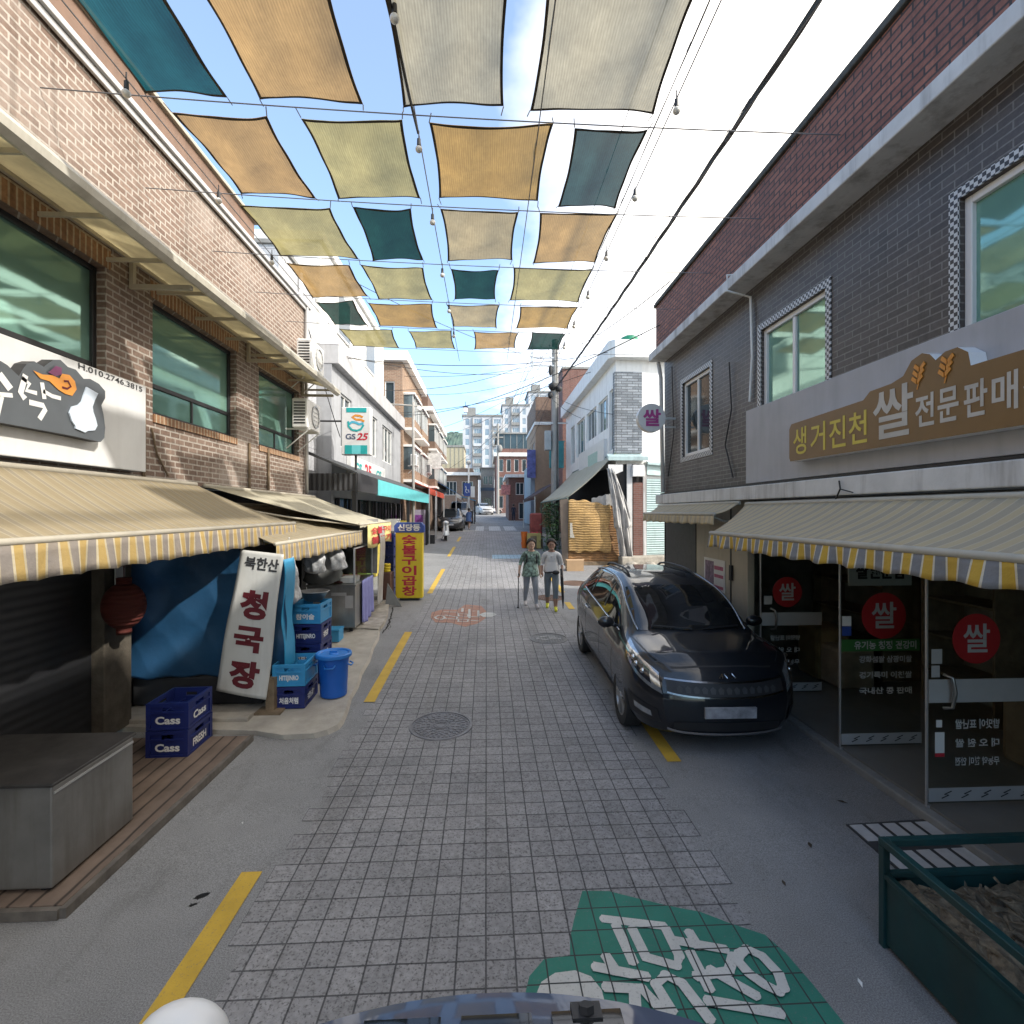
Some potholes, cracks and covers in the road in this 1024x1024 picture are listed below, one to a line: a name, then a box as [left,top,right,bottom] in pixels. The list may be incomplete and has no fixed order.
manhole cover [409,711,473,741]
manhole cover [529,633,568,644]
